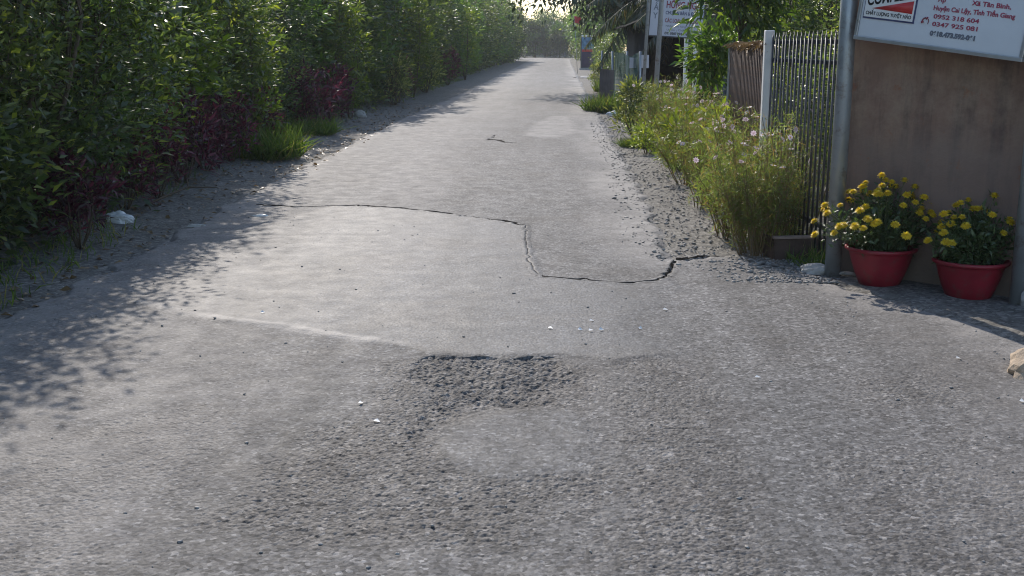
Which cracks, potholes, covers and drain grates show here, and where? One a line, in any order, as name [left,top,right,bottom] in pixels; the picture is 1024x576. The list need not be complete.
crack [484,135,516,143]
pothole [372,353,590,449]
crack [255,204,729,285]
